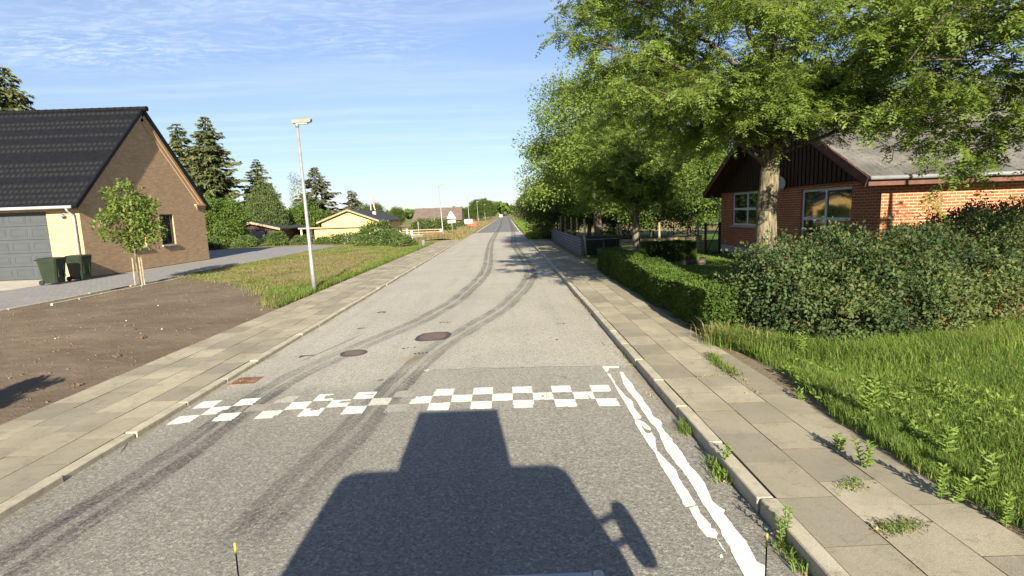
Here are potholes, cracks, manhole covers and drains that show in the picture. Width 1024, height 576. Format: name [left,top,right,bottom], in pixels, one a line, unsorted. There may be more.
manhole cover [415,332,452,342]
manhole cover [340,349,368,357]
